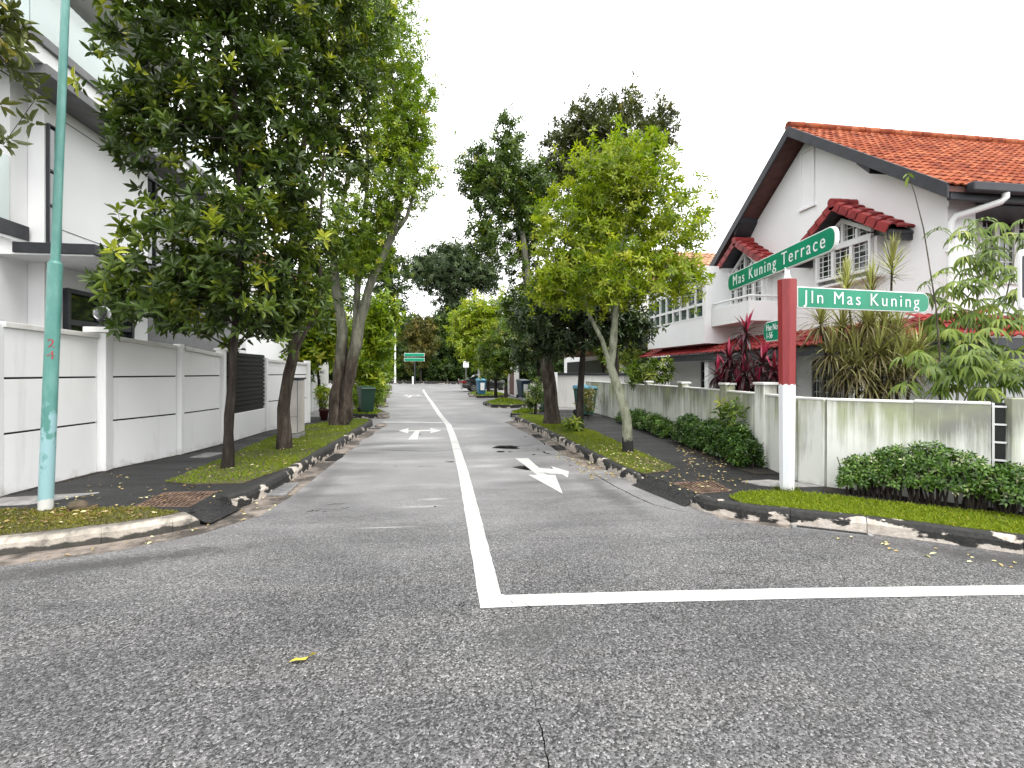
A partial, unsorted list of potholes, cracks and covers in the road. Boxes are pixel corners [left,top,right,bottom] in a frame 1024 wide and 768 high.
crack [527,673,550,768]
drain grate [672,480,732,494]
drain grate [133,491,218,507]
